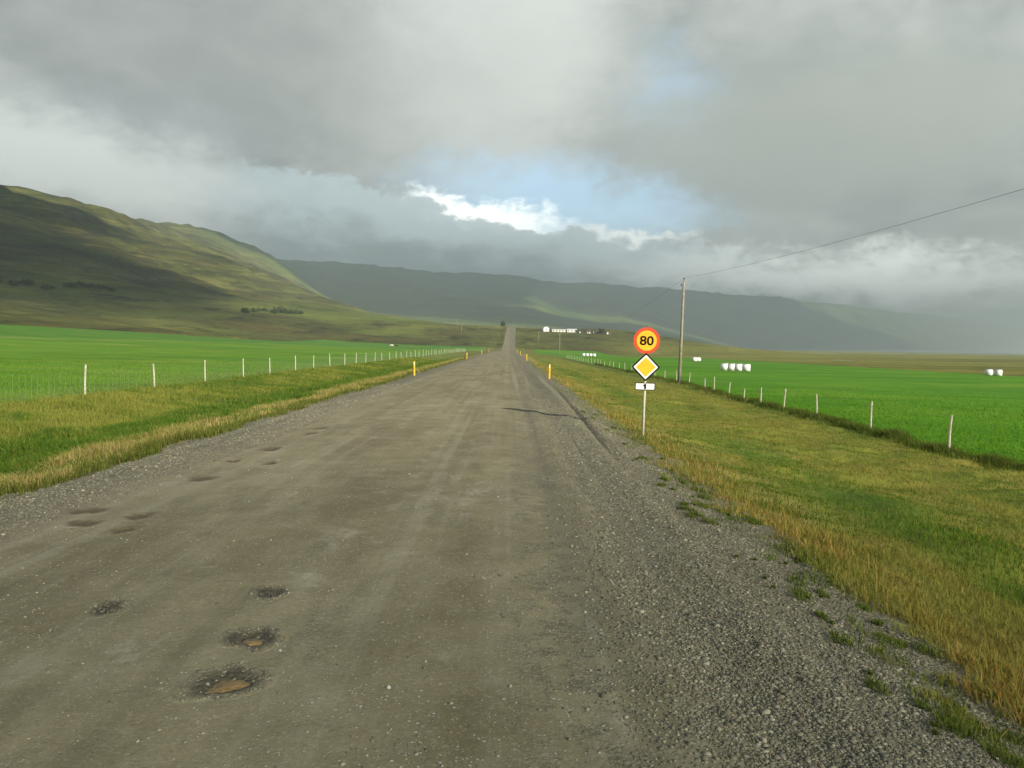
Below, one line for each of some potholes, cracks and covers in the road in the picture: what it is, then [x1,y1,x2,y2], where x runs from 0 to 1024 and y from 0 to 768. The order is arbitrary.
pothole [180,474,227,483]
pothole [57,518,112,529]
pothole [167,662,279,704]
pothole [212,624,289,654]
pothole [247,584,294,603]
